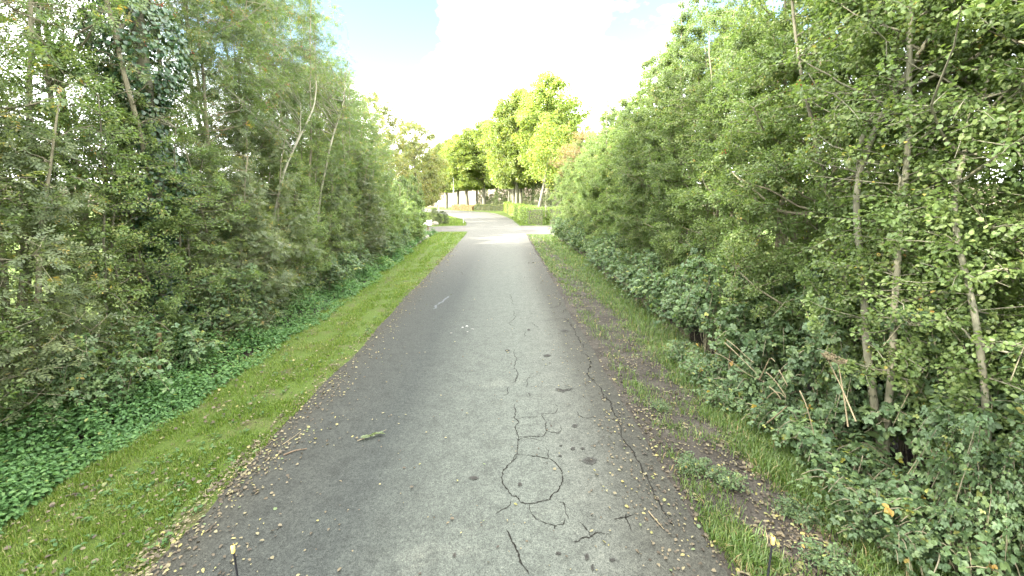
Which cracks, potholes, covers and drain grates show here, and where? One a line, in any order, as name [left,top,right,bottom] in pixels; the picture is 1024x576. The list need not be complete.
crack [496,294,674,573]
